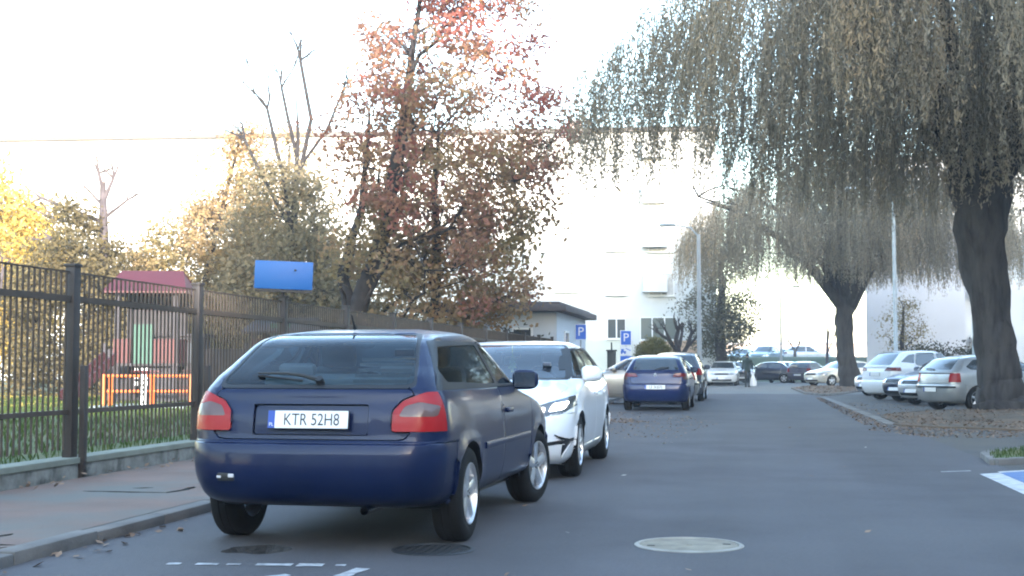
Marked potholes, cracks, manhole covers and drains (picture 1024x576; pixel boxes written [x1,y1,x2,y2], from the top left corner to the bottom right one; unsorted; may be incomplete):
manhole cover [634,537,745,553]
manhole cover [391,543,475,556]
